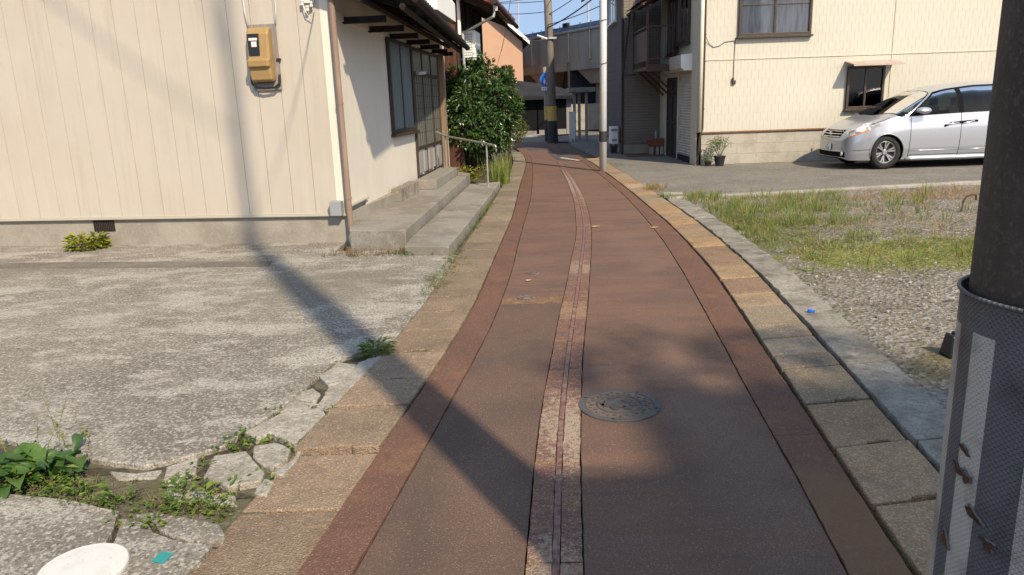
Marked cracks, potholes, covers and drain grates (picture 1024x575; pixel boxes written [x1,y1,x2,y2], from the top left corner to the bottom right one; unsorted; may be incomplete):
crack [110,515,121,543]
manhole cover [578,389,661,423]
crack [0,354,376,499]
